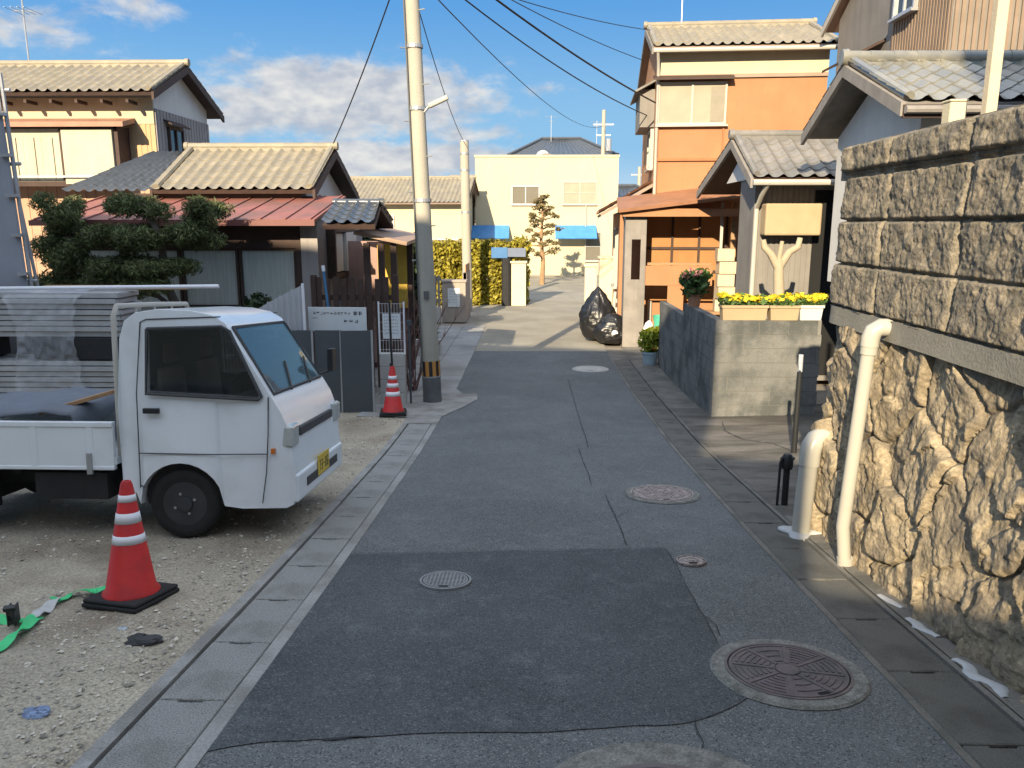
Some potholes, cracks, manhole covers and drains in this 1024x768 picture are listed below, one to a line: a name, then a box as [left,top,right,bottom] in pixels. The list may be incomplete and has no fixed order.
manhole cover [555,742,752,768]
manhole cover [710,639,871,710]
manhole cover [676,555,706,567]
crack [578,448,627,545]
manhole cover [420,571,471,591]
manhole cover [624,484,700,504]
